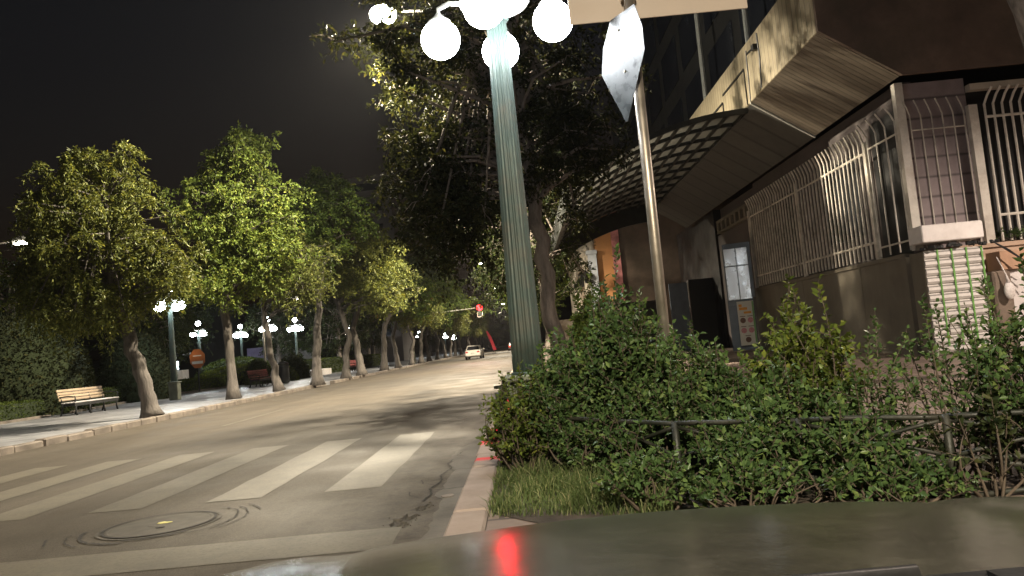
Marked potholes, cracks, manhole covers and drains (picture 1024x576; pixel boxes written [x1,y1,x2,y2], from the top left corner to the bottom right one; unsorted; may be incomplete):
crack [409,451,463,501]
manhole cover [95,510,222,540]
